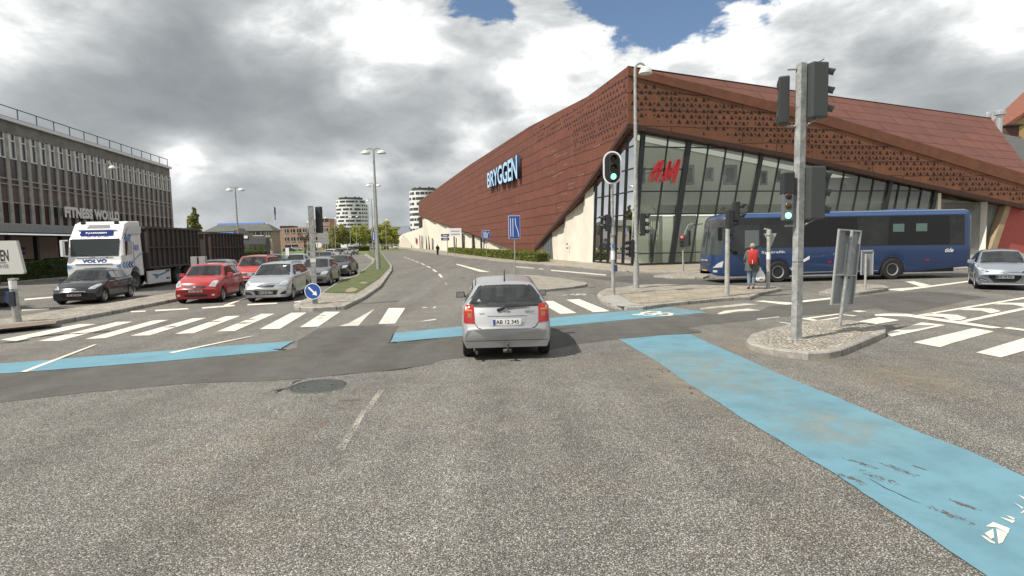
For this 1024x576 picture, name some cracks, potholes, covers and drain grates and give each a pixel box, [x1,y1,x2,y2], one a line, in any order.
manhole cover [287,379,350,394]
